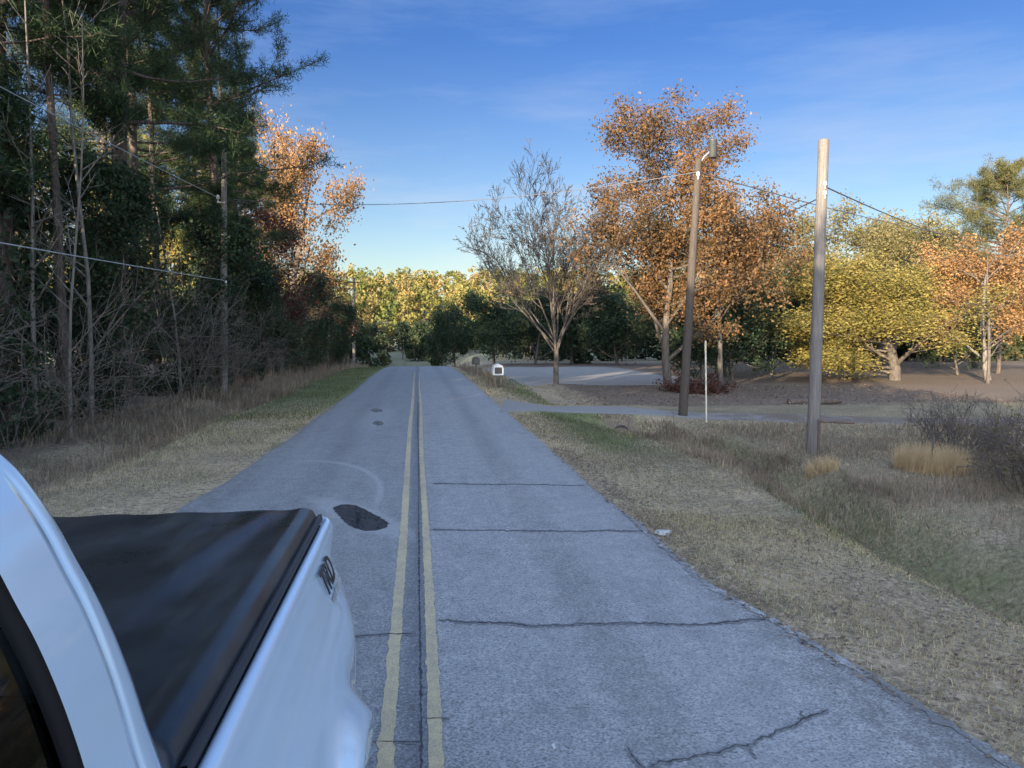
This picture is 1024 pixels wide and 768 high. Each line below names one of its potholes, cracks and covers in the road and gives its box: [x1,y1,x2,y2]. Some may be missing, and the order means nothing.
crack [624,709,829,768]
pothole [332,504,389,531]
crack [437,618,766,628]
